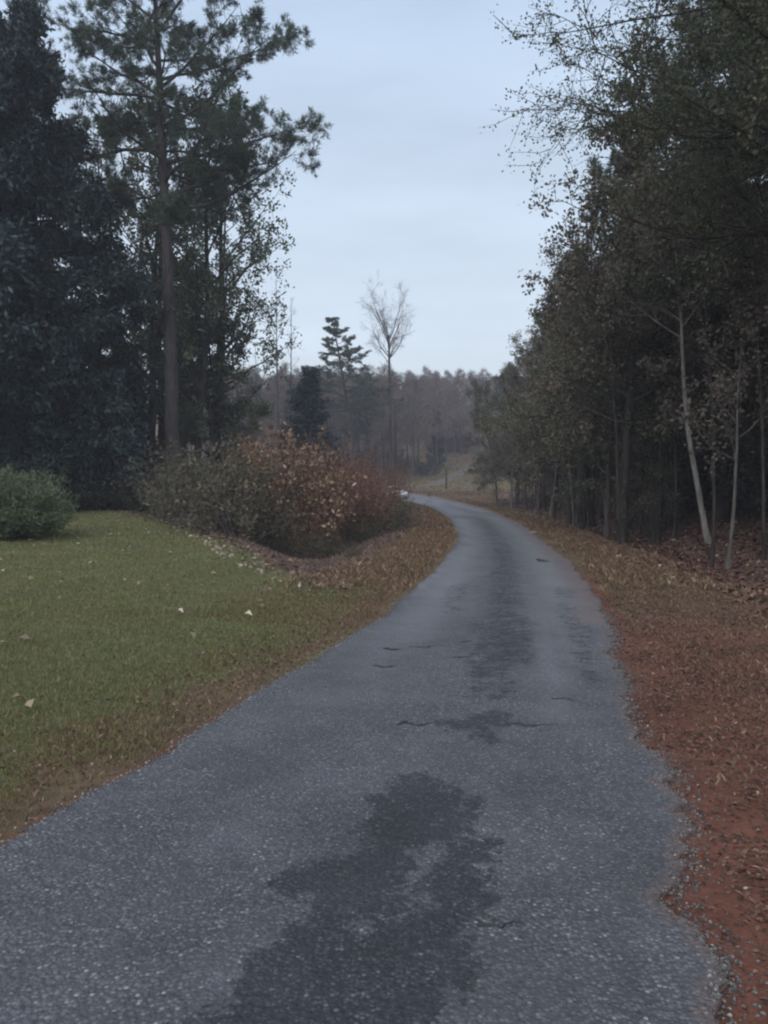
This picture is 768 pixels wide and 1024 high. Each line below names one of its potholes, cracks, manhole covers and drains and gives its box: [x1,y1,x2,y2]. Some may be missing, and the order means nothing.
crack [477,921,520,929]
crack [374,646,431,668]
